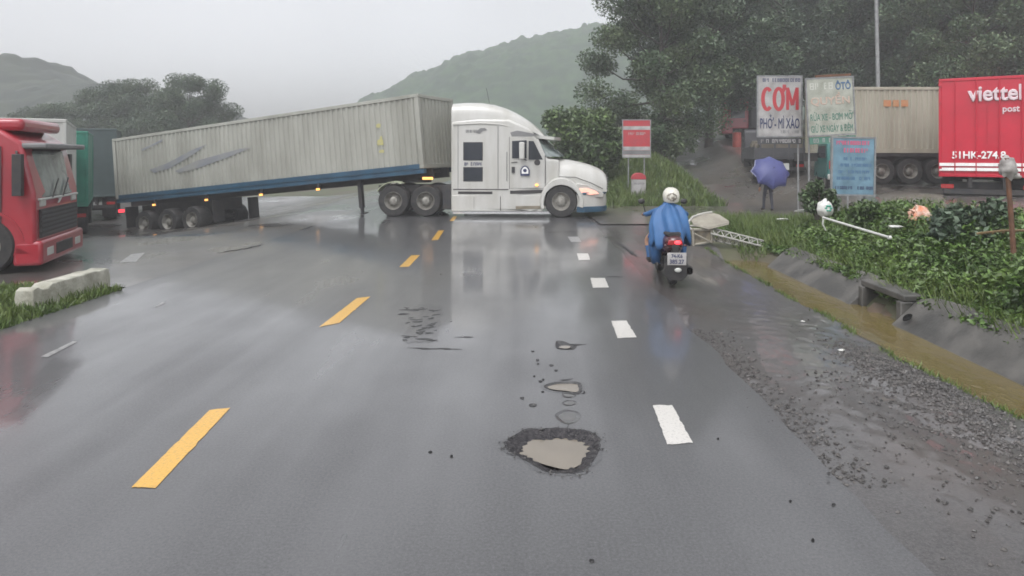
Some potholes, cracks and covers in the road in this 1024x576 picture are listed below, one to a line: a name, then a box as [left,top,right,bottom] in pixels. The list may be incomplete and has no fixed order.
pothole [504,427,601,473]
pothole [555,410,581,424]
pothole [555,341,577,350]
crack [399,307,470,349]
pothole [544,381,582,394]
